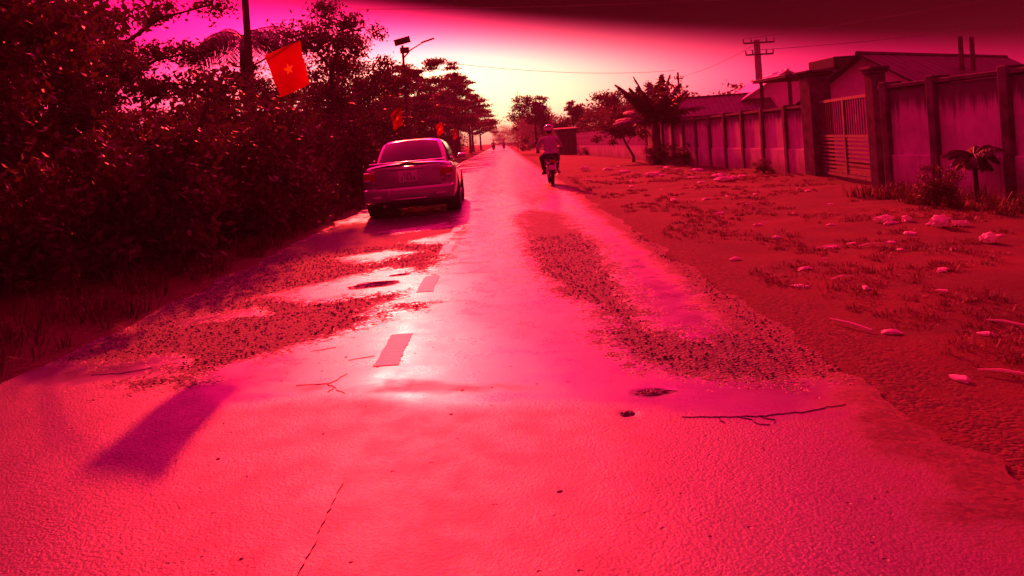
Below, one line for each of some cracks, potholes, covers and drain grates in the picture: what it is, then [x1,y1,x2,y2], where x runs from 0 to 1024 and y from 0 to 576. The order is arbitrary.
pothole [634,388,678,396]
pothole [347,280,399,290]
crack [296,347,375,393]
crack [682,404,845,425]
